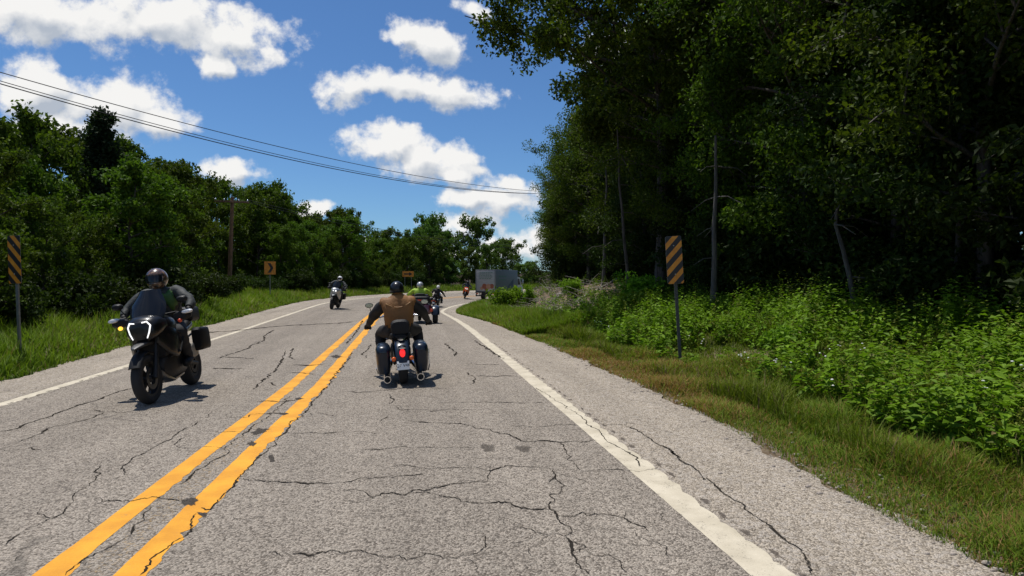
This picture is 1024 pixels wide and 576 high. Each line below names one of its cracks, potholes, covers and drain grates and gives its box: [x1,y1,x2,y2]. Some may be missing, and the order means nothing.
crack [6,321,813,575]
